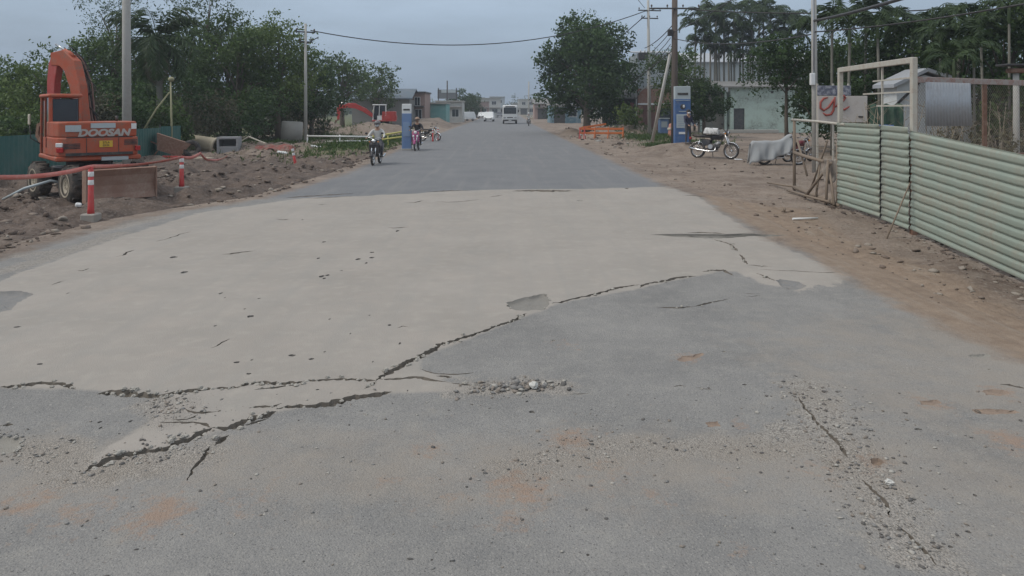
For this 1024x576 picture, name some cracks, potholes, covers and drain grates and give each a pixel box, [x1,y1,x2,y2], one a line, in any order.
pothole [506,293,550,311]
crack [78,313,527,480]
crack [661,299,726,309]
crack [553,232,838,303]
crack [799,398,849,457]
